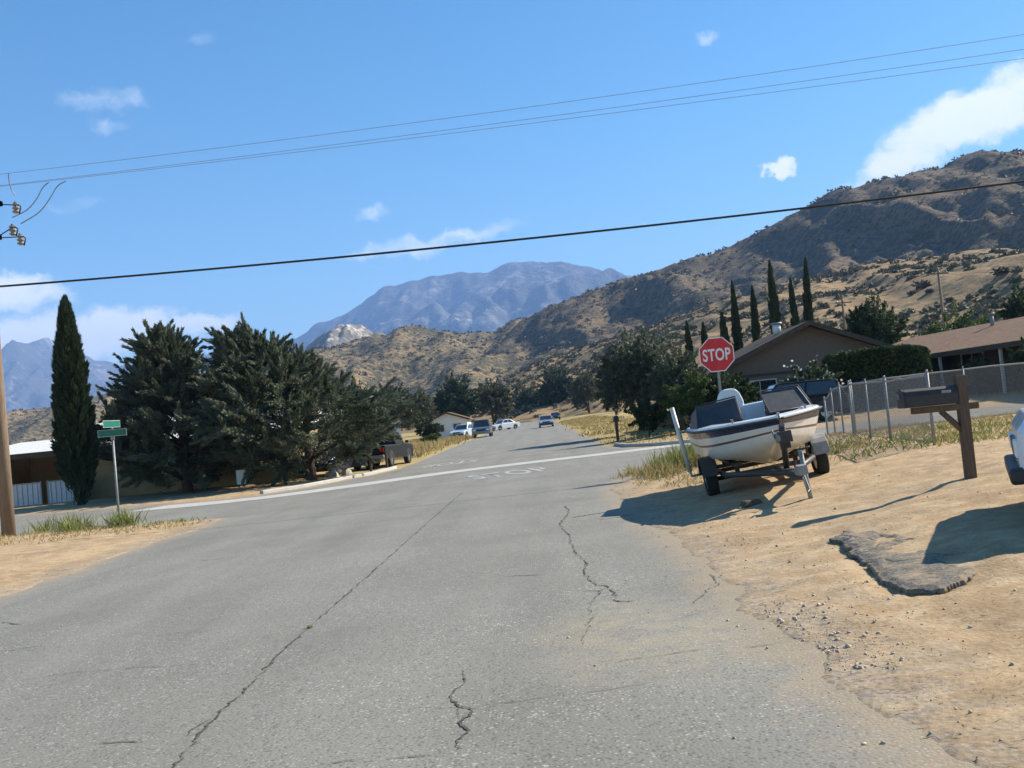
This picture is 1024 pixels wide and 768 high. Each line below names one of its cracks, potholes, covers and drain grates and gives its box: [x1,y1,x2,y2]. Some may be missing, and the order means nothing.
crack [560,506,665,645]
